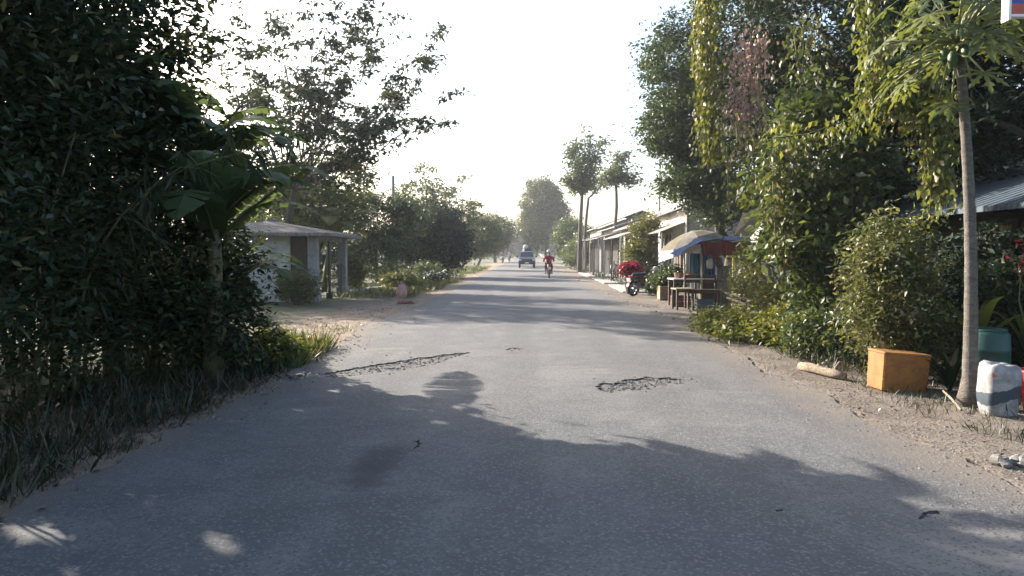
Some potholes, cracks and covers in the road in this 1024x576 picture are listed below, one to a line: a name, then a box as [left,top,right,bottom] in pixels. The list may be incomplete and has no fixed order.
pothole [592,376,692,393]
pothole [323,352,471,378]
